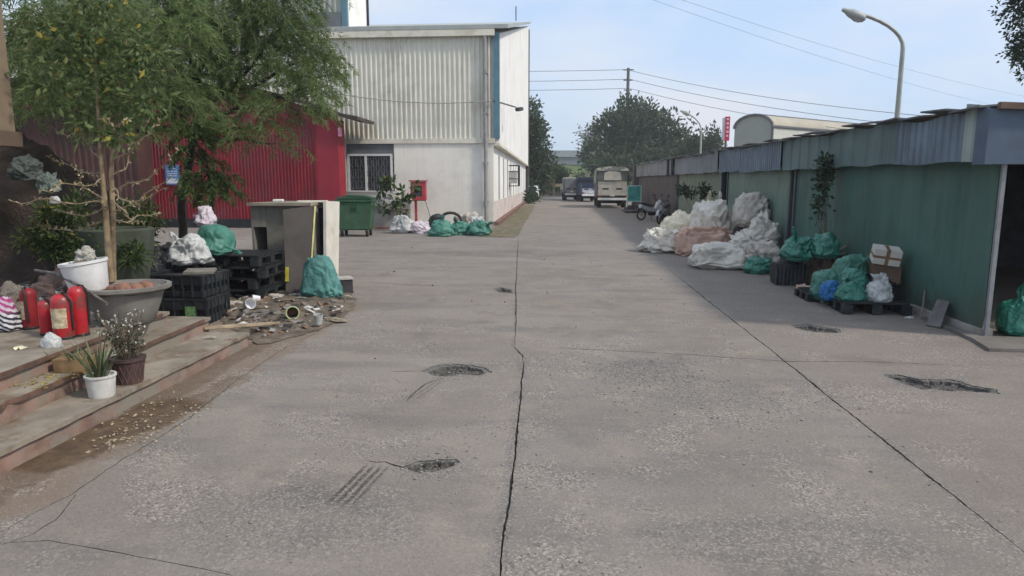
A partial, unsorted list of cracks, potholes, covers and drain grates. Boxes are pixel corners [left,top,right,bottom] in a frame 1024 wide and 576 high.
pothole [422,363,489,379]
pothole [791,324,841,333]
pothole [885,375,1022,394]
pothole [401,456,460,474]
crack [500,249,524,576]
